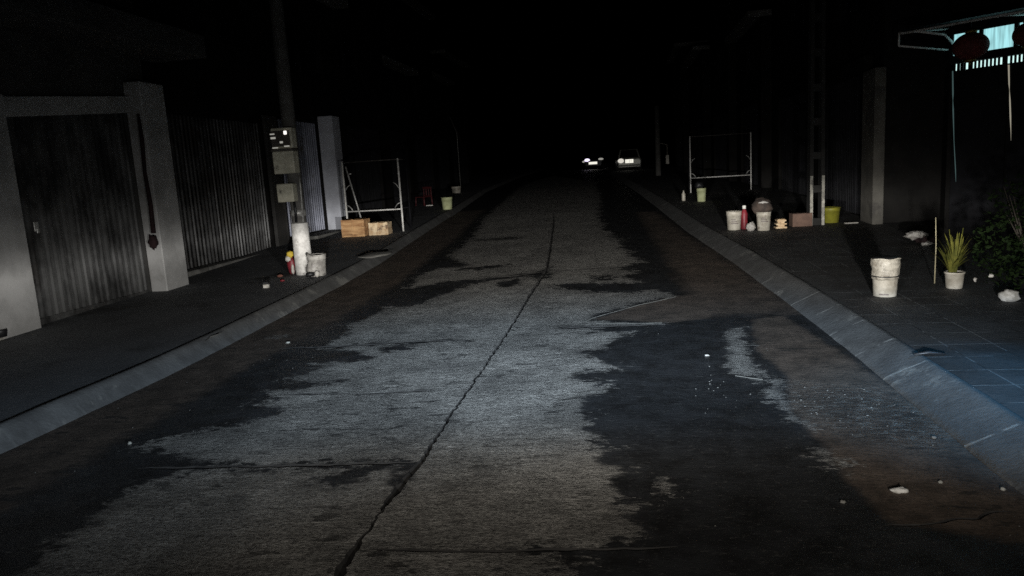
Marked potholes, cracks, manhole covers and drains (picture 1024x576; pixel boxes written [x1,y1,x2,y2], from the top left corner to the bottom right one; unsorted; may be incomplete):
crack [137,213,678,576]
crack [881,511,1009,527]
